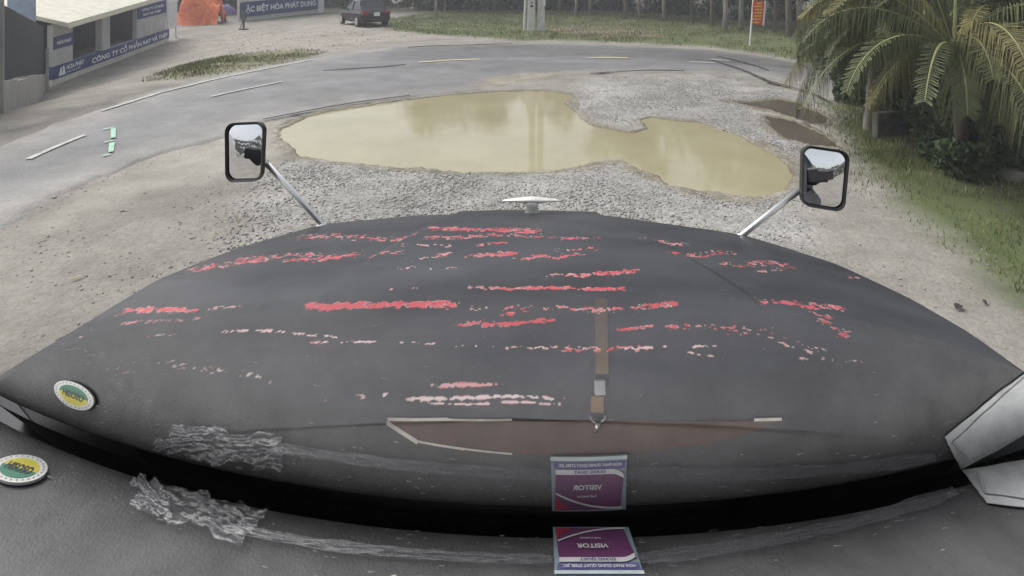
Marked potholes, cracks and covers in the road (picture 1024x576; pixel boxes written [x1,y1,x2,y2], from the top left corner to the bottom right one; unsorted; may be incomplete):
pothole [754,113,847,151]
pothole [719,97,840,127]
pothole [270,88,800,204]
